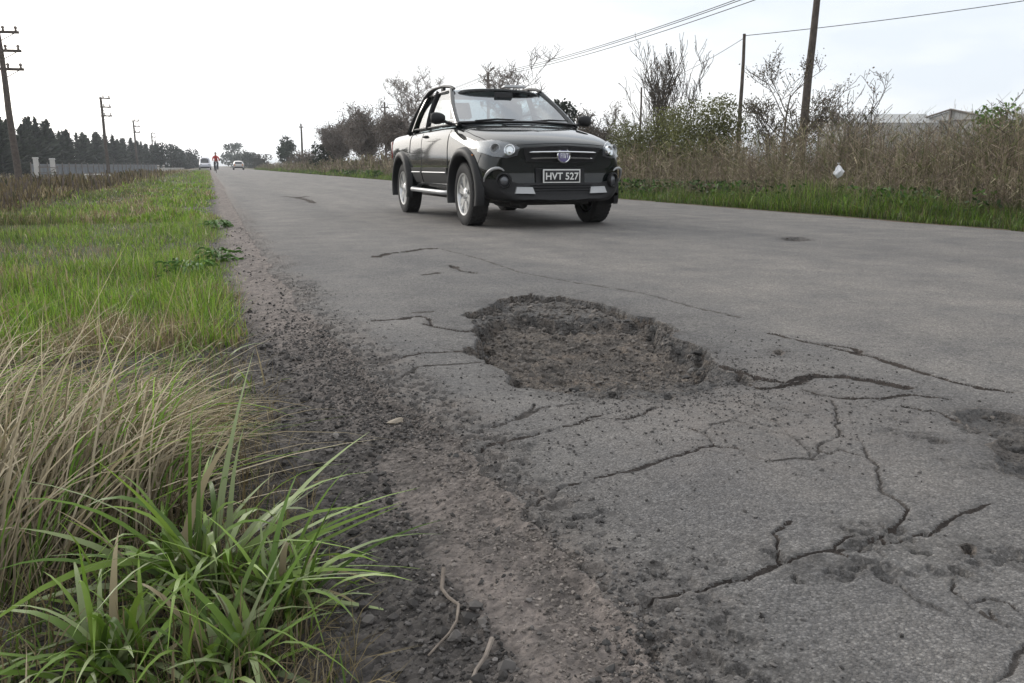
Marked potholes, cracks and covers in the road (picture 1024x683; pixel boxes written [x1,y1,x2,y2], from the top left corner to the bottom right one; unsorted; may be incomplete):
pothole [460,293,759,401]
crack [371,248,477,275]
crack [373,351,481,380]
pothole [950,407,1024,479]
crack [1003,647,1024,678]
crack [481,403,659,453]
crack [950,584,1016,621]
crack [536,333,1014,609]
